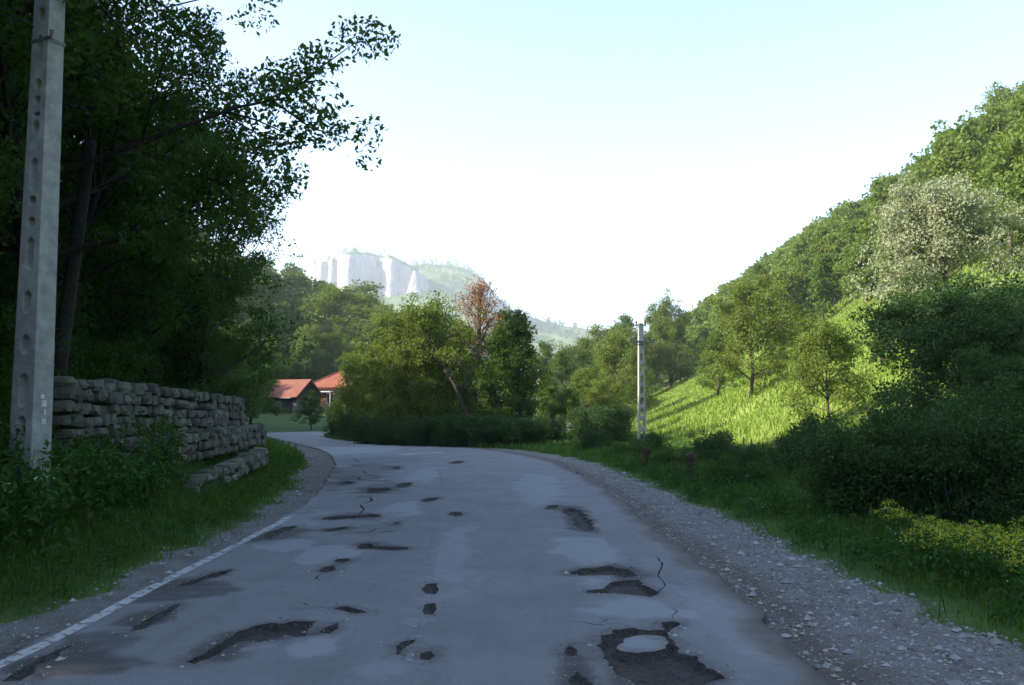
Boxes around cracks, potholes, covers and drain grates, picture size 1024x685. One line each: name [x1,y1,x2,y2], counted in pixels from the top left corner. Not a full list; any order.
pothole [3,645,72,681]
pothole [421,583,439,594]
pothole [129,604,180,632]
pothole [320,622,339,634]
pothole [569,565,638,581]
pothole [176,570,232,587]
crack [333,458,396,536]
pothole [396,640,415,655]
pothole [422,603,437,615]
pothole [562,508,595,531]
pothole [187,621,316,664]
pothole [597,621,726,685]
